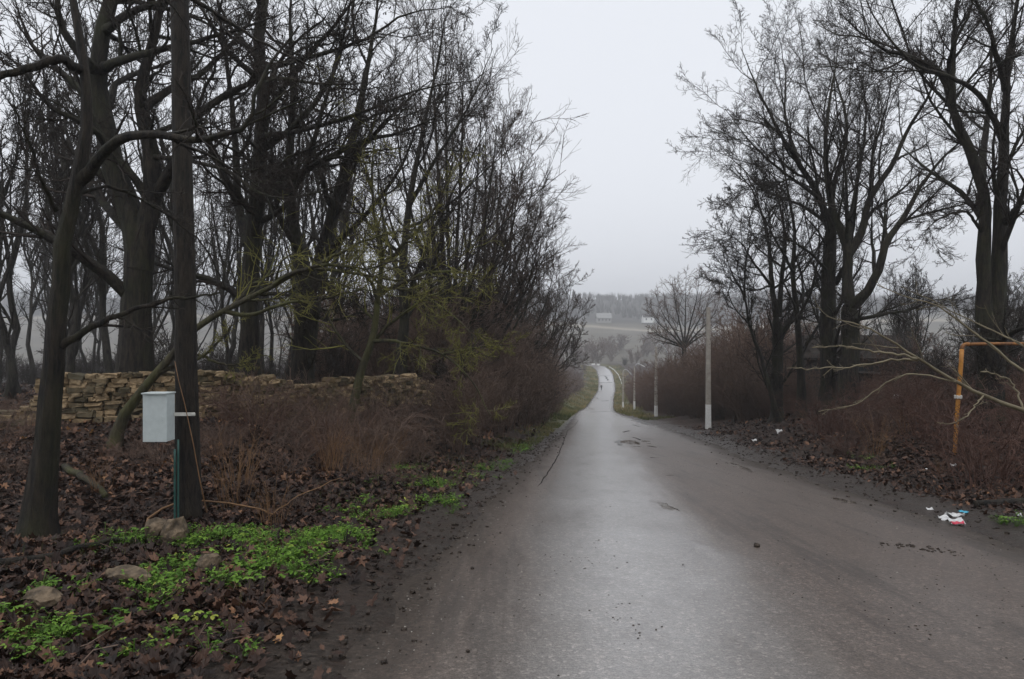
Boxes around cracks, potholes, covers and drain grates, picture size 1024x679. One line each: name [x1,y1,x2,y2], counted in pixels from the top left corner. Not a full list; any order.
crack [538,421,578,486]
